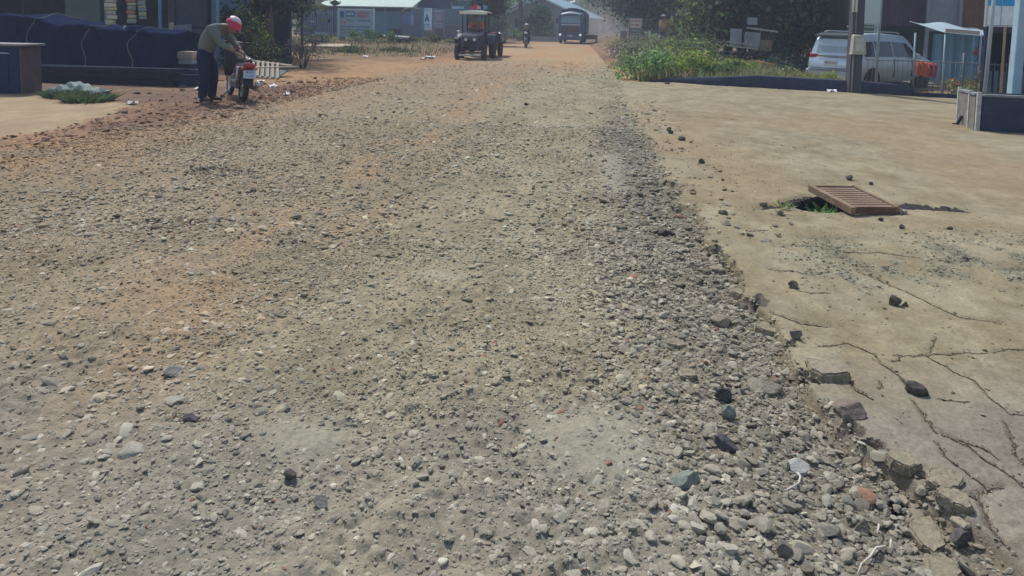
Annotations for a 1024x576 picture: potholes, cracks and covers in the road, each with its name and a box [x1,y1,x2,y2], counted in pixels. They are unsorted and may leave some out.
crack [858,272,999,324]
crack [824,249,920,258]
crack [772,313,1024,558]
